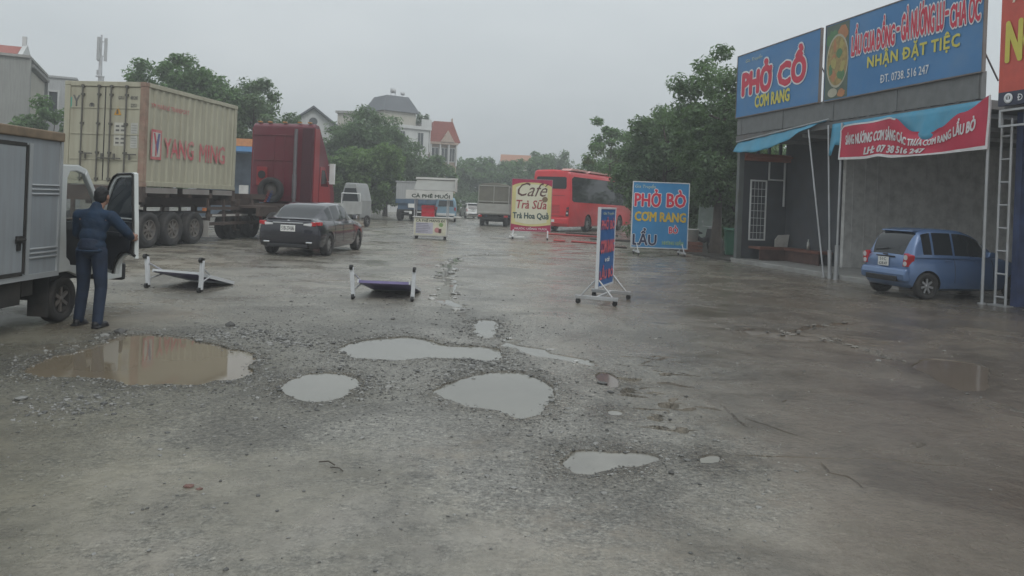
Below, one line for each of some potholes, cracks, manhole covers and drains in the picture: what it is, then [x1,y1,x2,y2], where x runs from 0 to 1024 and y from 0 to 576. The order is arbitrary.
pothole [472,320,501,338]
pothole [559,449,661,475]
pothole [595,372,619,388]
pothole [432,370,556,419]
crack [820,462,864,489]
pothole [698,454,722,463]
pothole [912,359,992,391]
pothole [22,334,257,385]
crack [715,321,906,362]
pothole [337,336,505,360]
crack [599,356,804,438]
crack [428,254,512,318]
